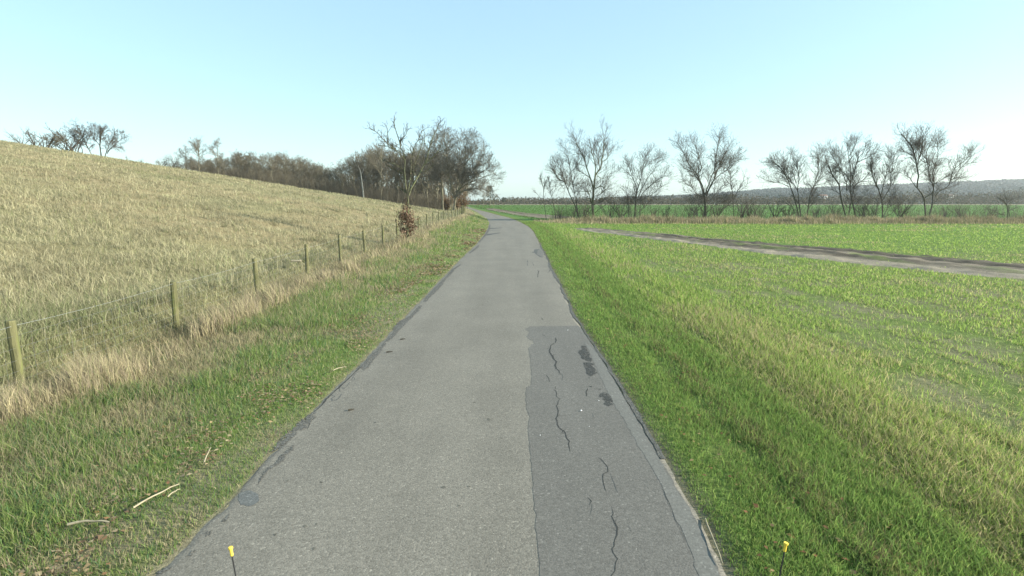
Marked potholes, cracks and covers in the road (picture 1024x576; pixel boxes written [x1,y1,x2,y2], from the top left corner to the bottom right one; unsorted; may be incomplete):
crack [546,338,570,449]
crack [589,459,631,576]
